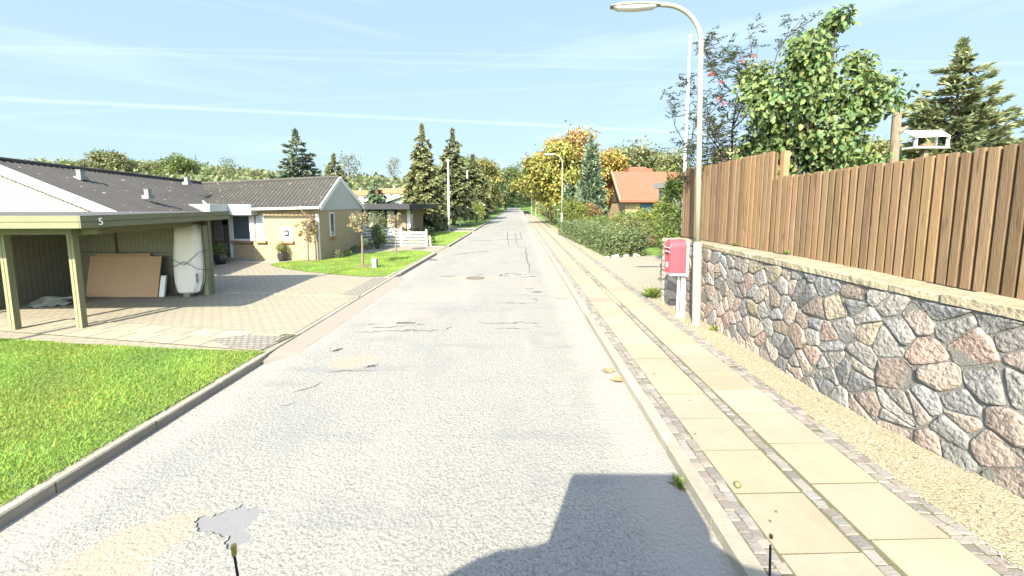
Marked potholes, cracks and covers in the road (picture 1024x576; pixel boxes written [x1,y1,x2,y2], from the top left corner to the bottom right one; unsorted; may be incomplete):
crack [456,229,537,304]
crack [280,370,374,406]
